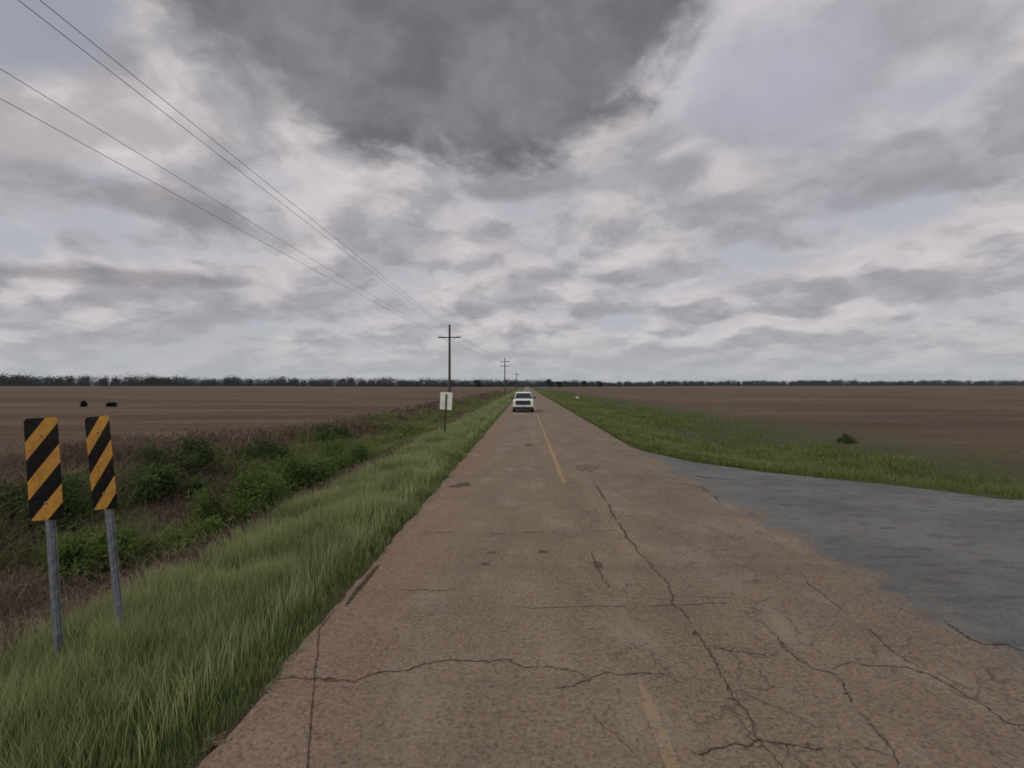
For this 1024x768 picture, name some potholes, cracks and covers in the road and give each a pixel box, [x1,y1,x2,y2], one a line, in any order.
crack [257,659,662,701]
crack [421,482,1023,768]
